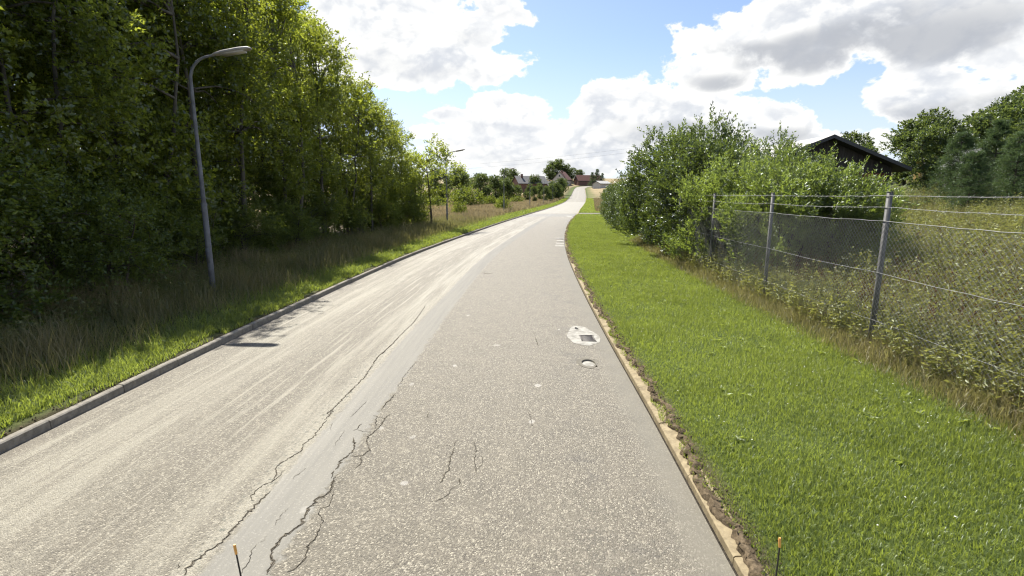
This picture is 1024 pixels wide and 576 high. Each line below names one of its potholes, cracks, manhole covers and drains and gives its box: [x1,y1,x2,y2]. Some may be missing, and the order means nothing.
manhole cover [576,358,597,368]
crack [178,306,425,575]
crack [436,441,483,504]
